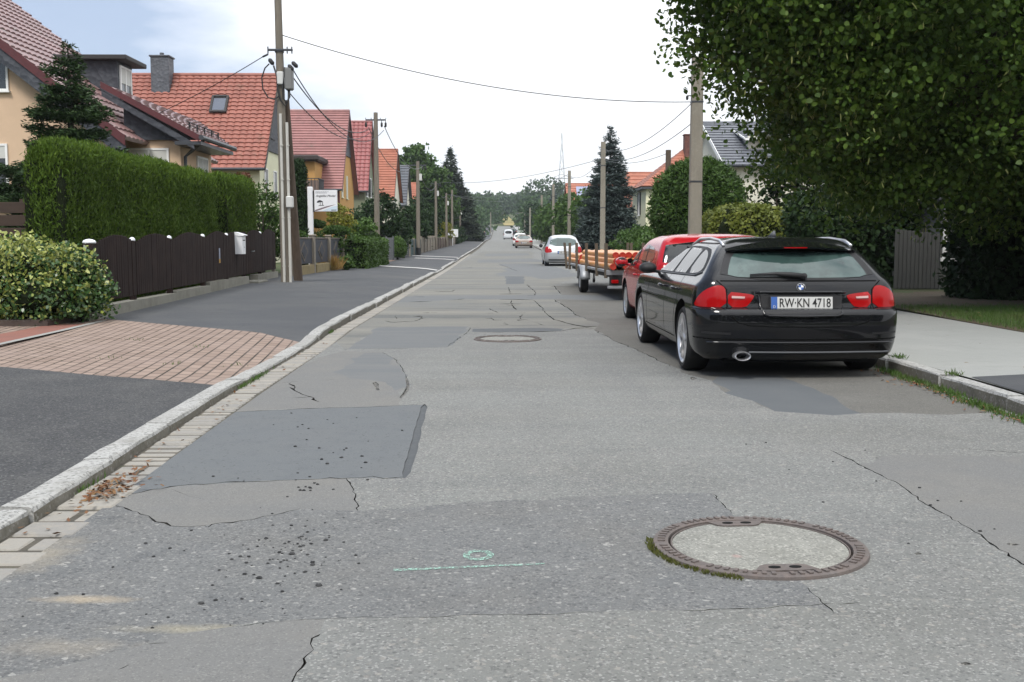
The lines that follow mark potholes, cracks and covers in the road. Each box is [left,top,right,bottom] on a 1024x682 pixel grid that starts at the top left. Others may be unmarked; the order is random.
crack [118,506,297,527]
manhole cover [653,516,870,581]
crack [833,451,1024,565]
crack [133,476,397,510]
crack [382,269,690,378]
crack [236,611,597,682]
crack [242,381,424,412]
manhole cover [474,335,541,343]
